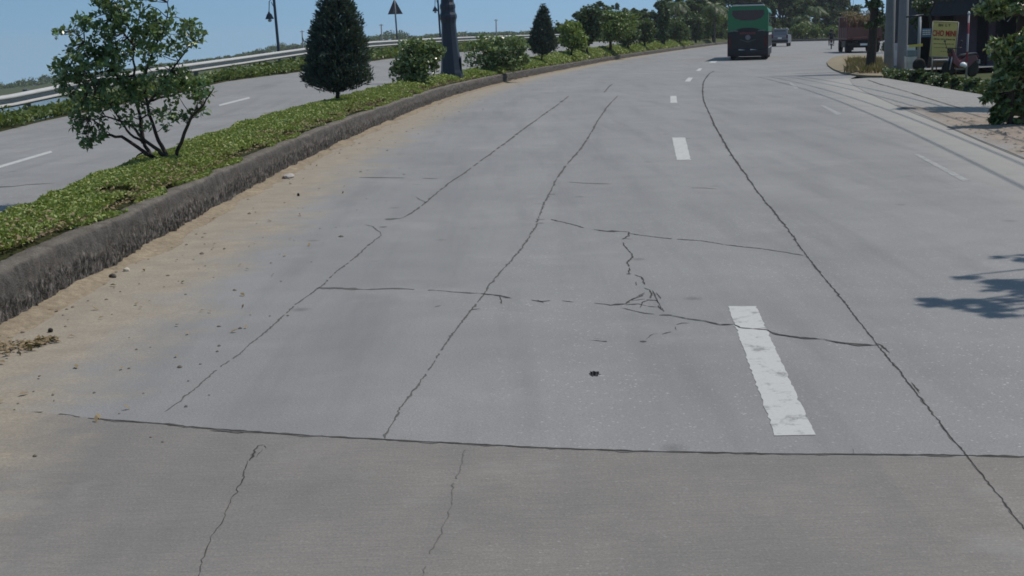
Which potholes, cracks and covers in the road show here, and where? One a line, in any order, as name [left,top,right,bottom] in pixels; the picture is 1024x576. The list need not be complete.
crack [164,84,871,438]
crack [198,445,266,576]
crack [423,449,466,575]
